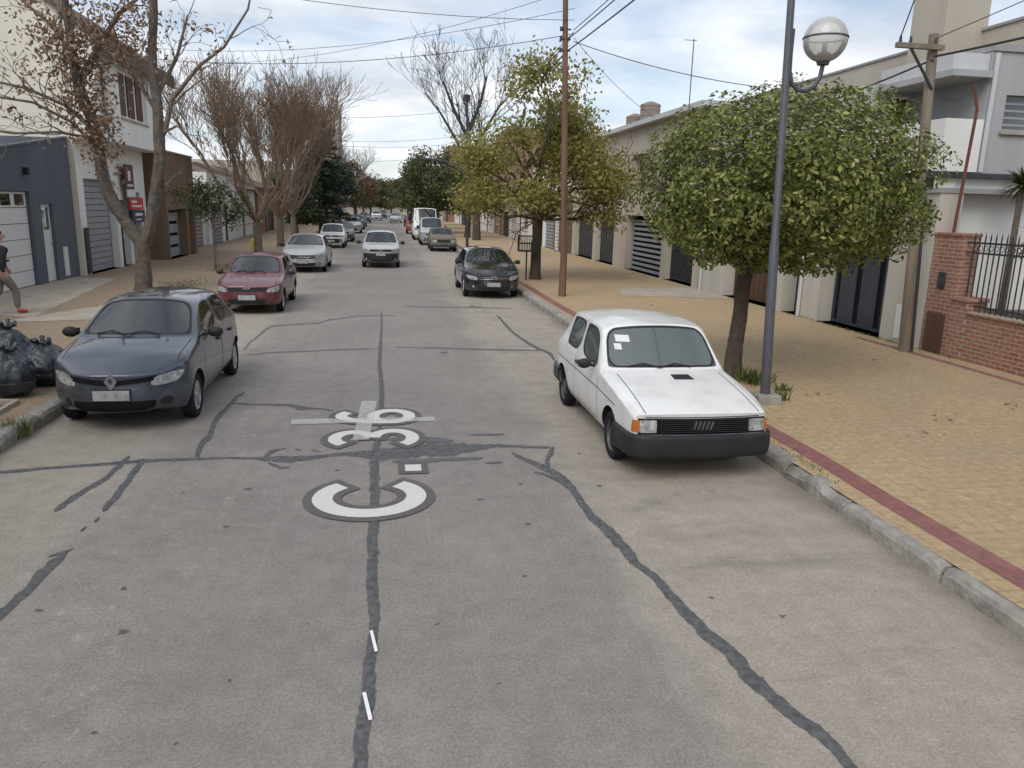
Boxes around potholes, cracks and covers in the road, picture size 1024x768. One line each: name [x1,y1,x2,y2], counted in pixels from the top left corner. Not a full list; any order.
crack [496,315,555,361]
crack [243,315,396,351]
